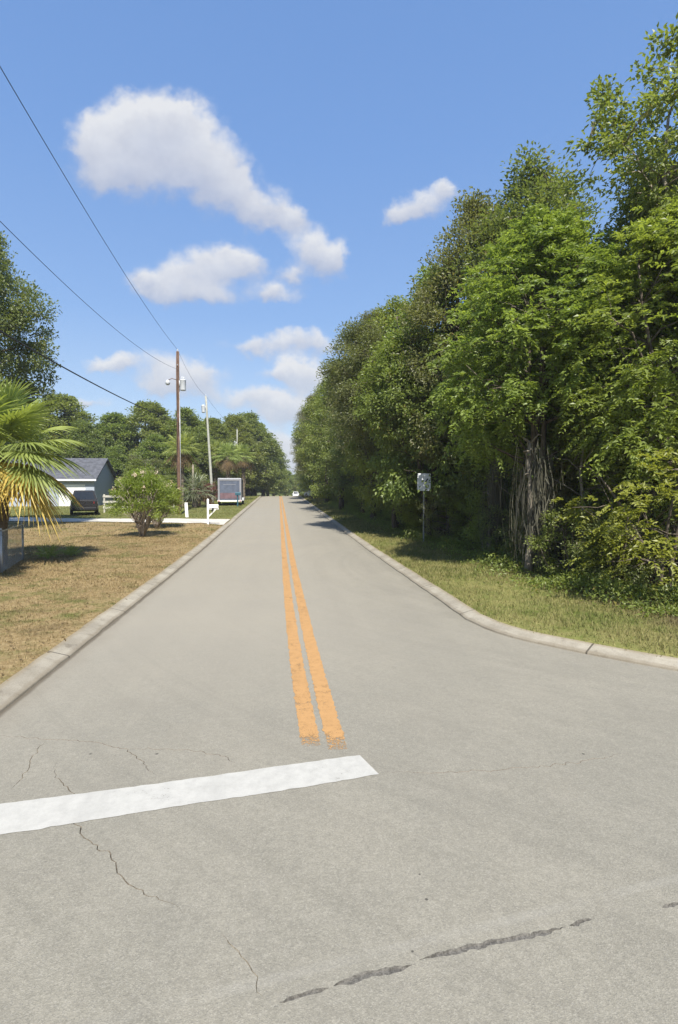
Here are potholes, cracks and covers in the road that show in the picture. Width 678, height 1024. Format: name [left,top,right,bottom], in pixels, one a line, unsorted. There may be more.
crack [224,902,678,1003]
crack [4,735,235,913]
